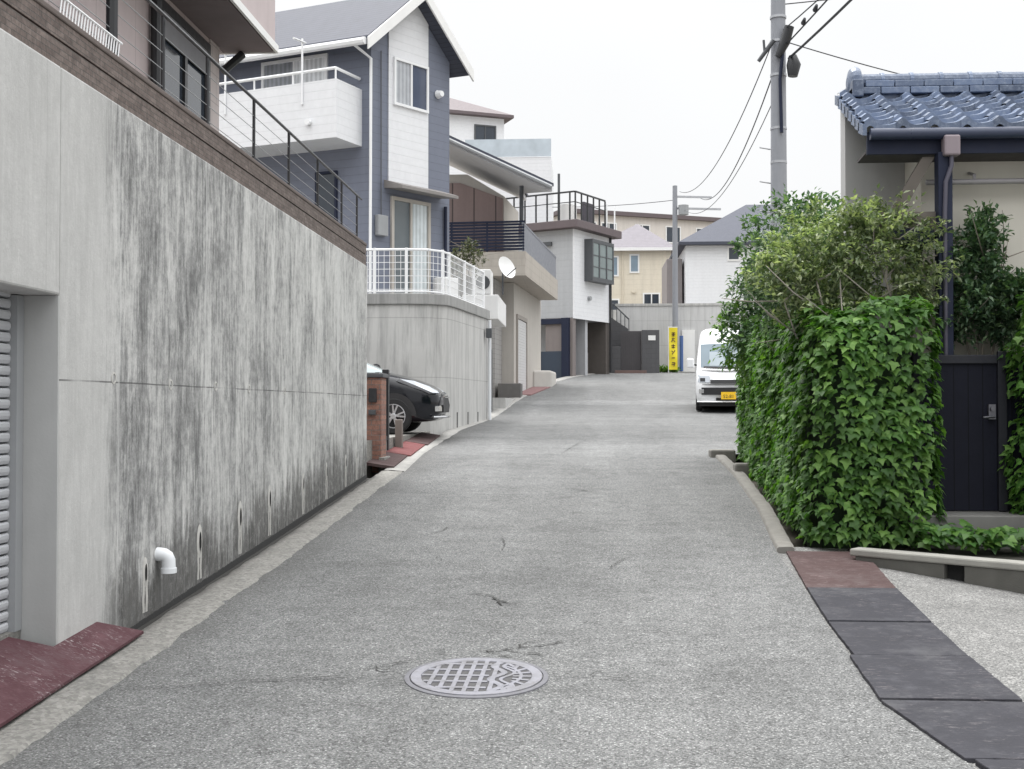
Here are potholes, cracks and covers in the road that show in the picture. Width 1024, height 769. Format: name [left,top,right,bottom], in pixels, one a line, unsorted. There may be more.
manhole cover [404,657,549,699]
crack [471,638,575,656]
